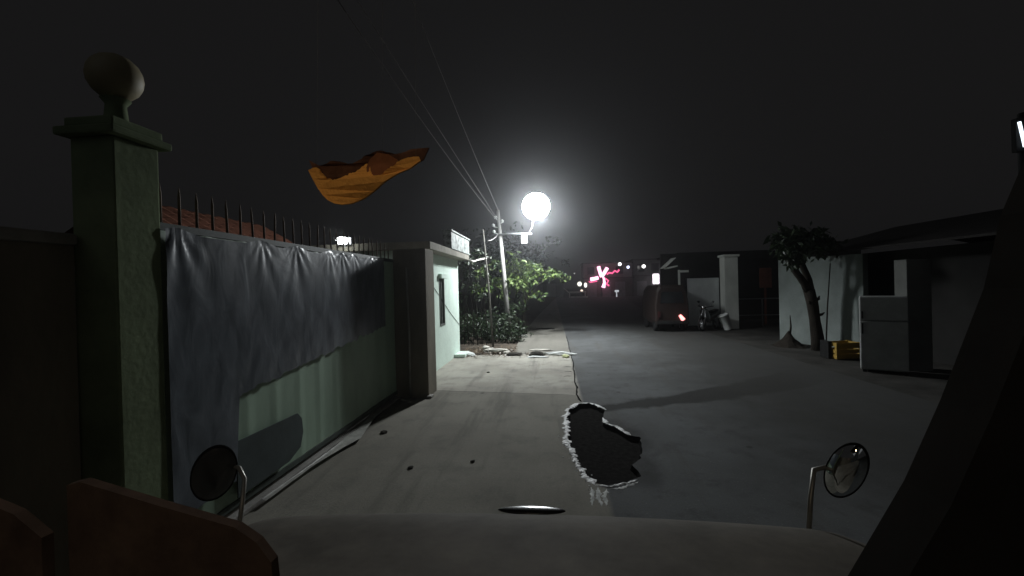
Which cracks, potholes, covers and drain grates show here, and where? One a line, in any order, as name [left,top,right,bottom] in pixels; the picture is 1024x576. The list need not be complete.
pothole [558,402,642,506]
